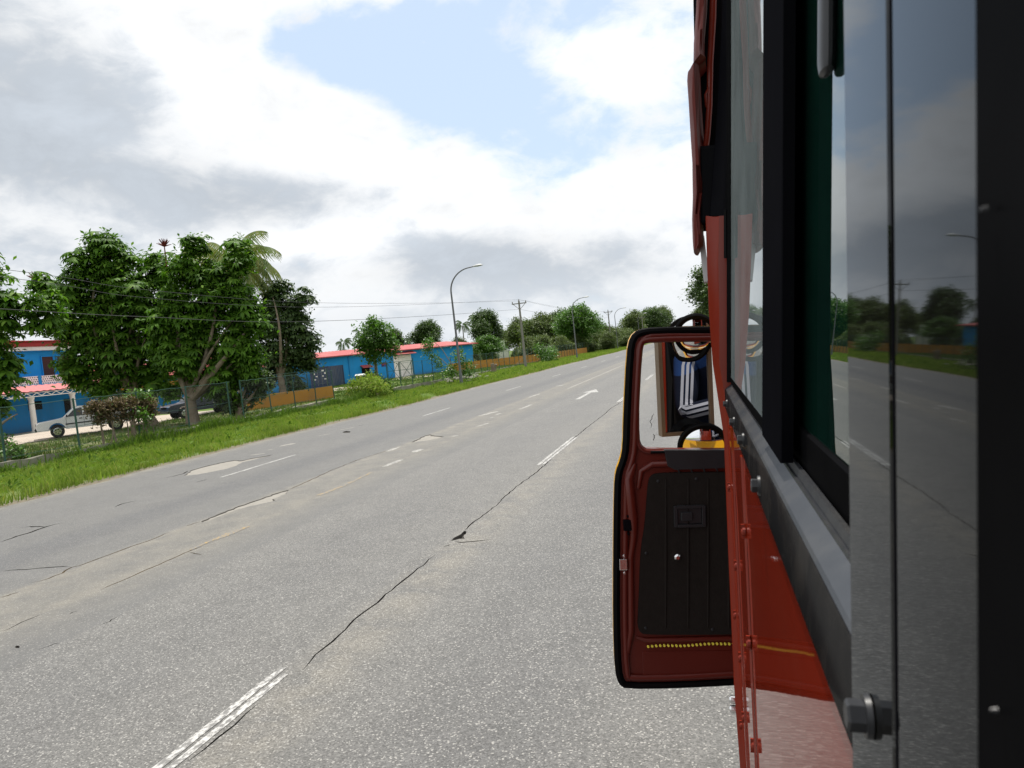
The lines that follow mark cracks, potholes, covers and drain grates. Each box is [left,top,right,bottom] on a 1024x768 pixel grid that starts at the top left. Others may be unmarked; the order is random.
crack [186,402,621,763]
crack [1,451,385,598]
